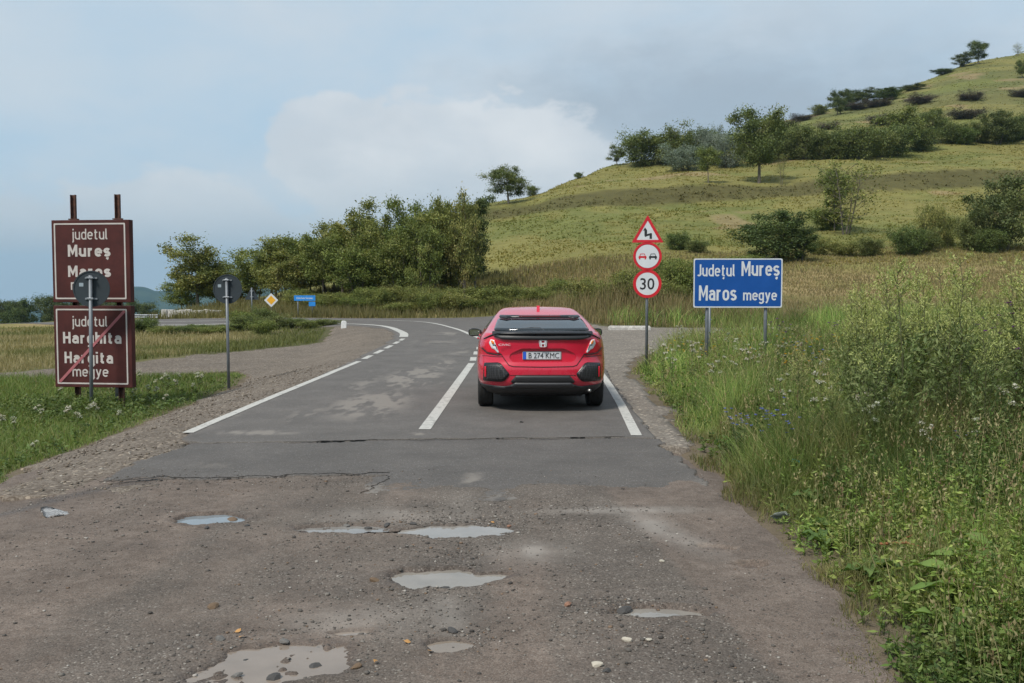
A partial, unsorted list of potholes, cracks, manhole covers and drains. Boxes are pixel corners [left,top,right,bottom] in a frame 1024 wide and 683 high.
pothole [421,637,477,653]
pothole [175,638,363,683]
pothole [601,602,724,617]
pothole [366,522,514,539]
pothole [288,523,398,534]
crack [89,472,390,493]
pothole [381,565,519,589]
pothole [168,511,250,526]
